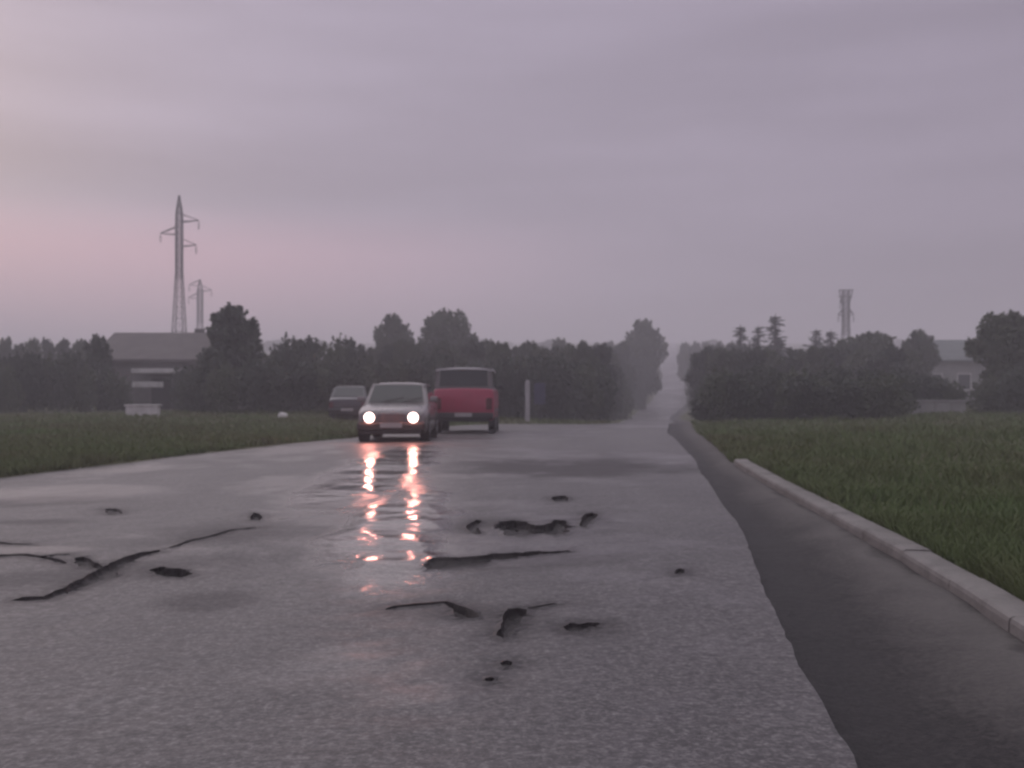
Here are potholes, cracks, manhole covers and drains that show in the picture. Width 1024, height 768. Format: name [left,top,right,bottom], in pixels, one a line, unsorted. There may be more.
pothole [579,513,598,528]
pothole [149,567,192,578]
pothole [563,622,600,632]
crack [169,527,254,548]
pothole [496,608,527,638]
crack [0,542,66,564]
pothole [466,520,482,535]
pothole [494,520,575,537]
crack [386,601,479,618]
